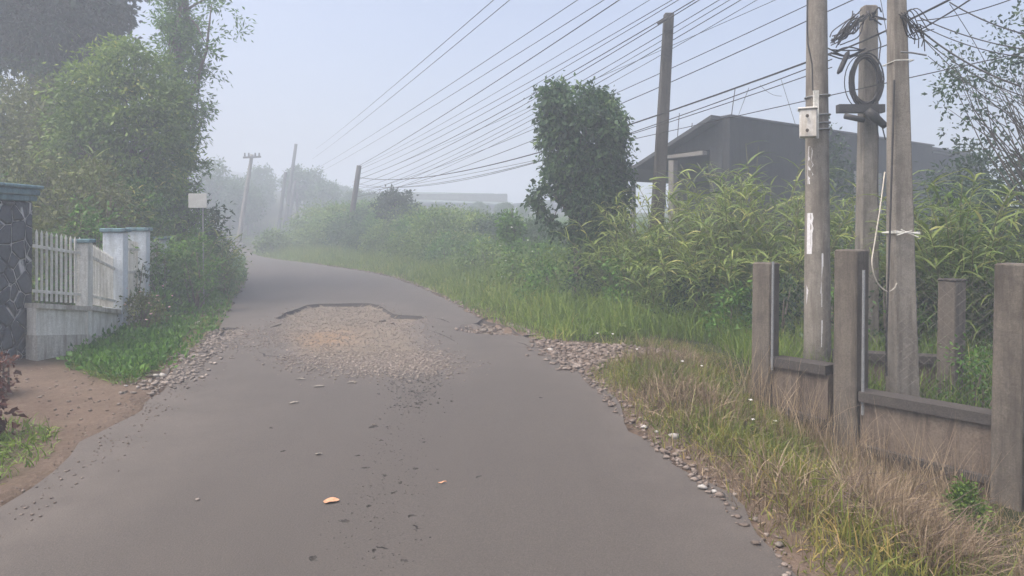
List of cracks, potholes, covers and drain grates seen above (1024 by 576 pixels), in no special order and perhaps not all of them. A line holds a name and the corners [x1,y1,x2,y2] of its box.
pothole [231,301,493,386]
